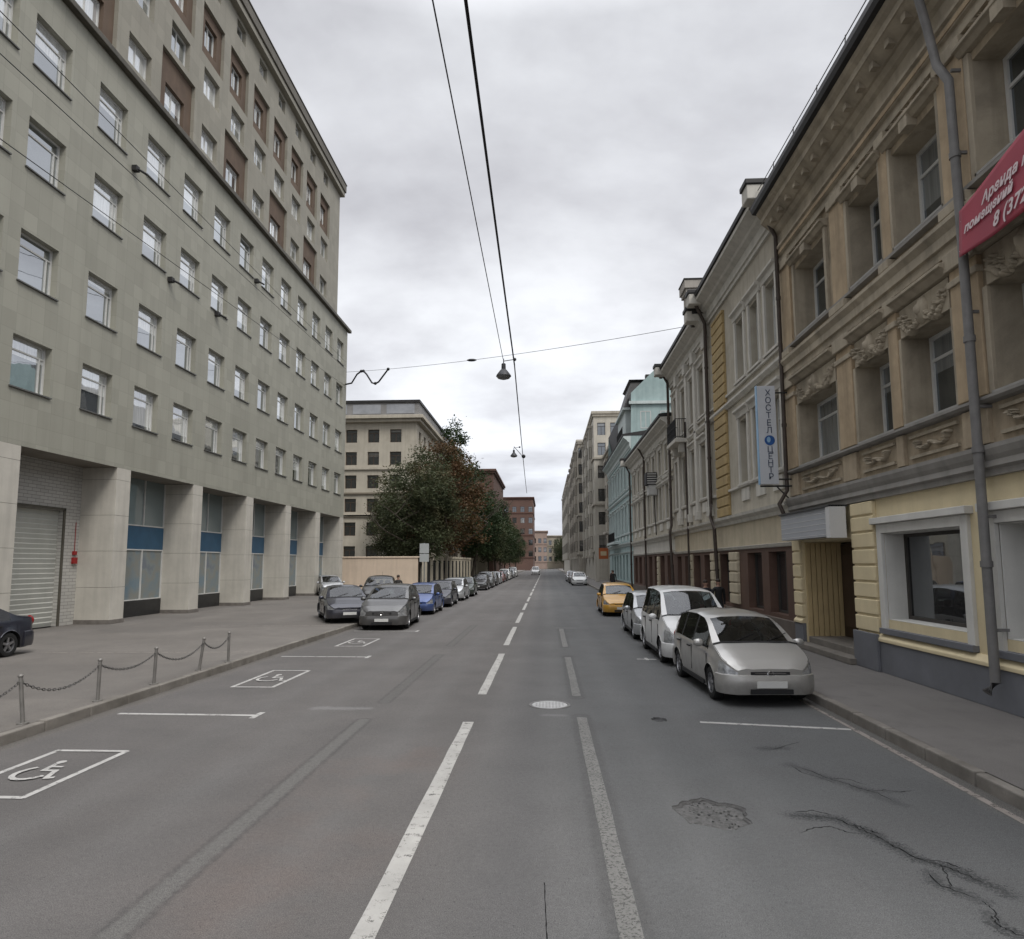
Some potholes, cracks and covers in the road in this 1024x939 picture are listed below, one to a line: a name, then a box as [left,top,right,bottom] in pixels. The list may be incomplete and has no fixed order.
crack [792,766,912,803]
manhole cover [529,700,570,710]
pothole [672,797,752,830]
crack [797,810,1023,936]
